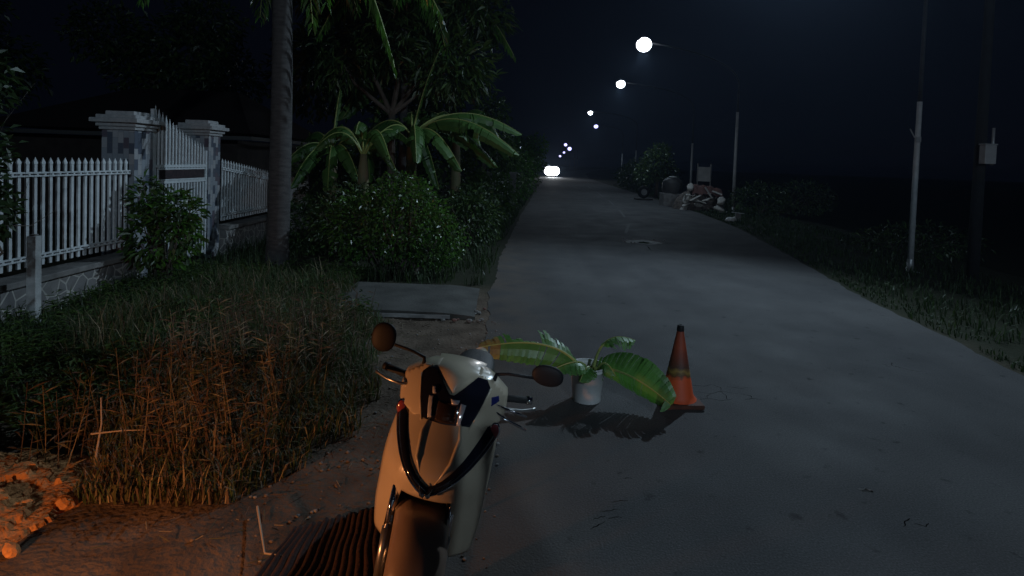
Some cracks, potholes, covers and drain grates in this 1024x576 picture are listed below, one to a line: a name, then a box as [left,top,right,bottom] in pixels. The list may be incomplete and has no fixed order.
crack [591,478,628,529]
